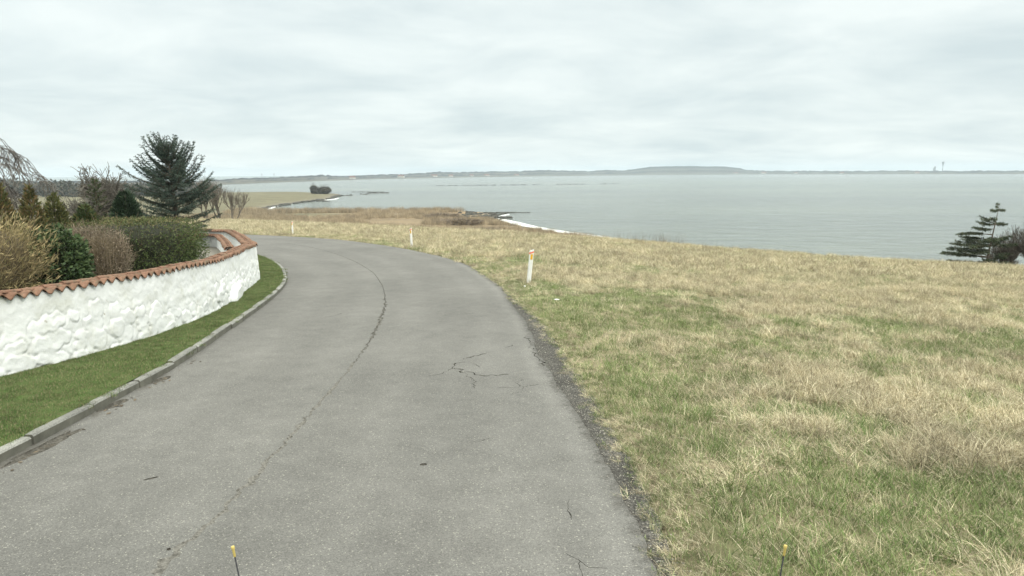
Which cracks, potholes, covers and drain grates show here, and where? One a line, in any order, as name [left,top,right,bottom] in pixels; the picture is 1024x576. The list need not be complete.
crack [430,336,546,388]
